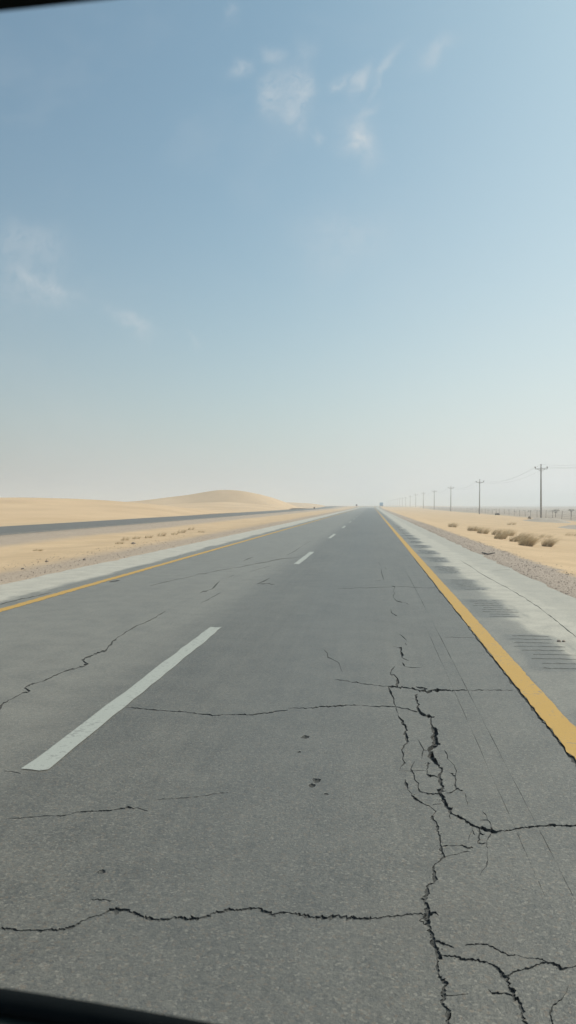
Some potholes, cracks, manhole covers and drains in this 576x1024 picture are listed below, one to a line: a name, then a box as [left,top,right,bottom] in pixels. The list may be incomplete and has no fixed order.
crack [1,560,576,1024]
crack [151,543,307,603]
